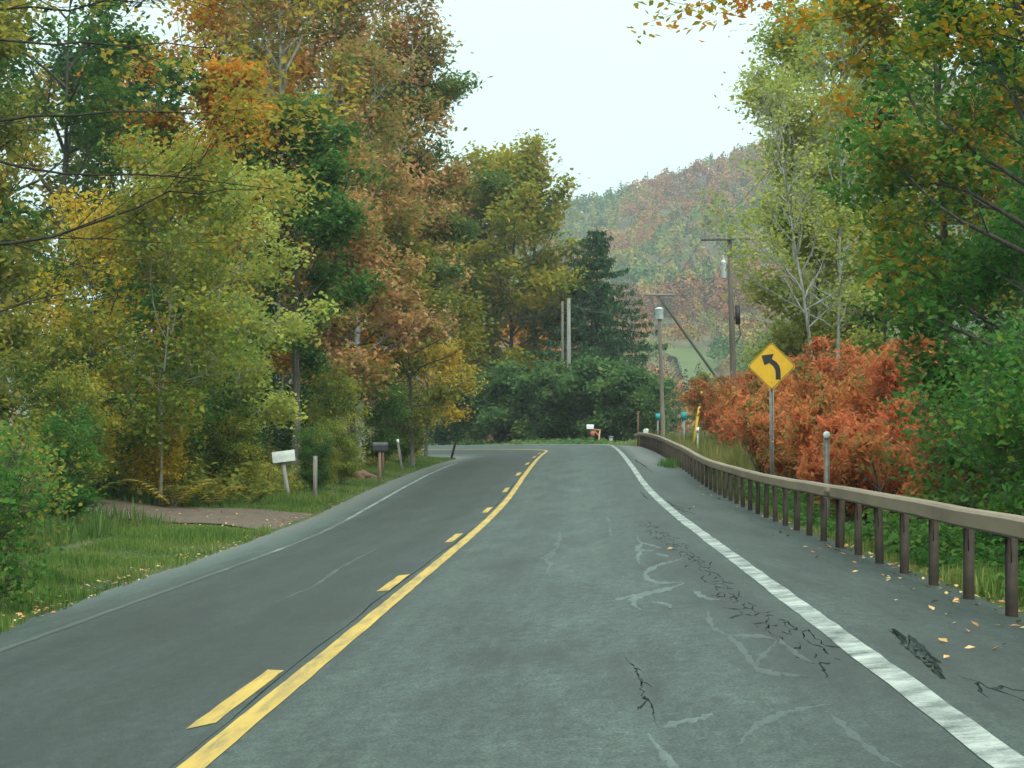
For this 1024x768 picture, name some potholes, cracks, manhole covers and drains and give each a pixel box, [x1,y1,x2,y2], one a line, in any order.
crack [640,521,841,678]
crack [962,677,1024,701]
crack [625,657,713,768]
